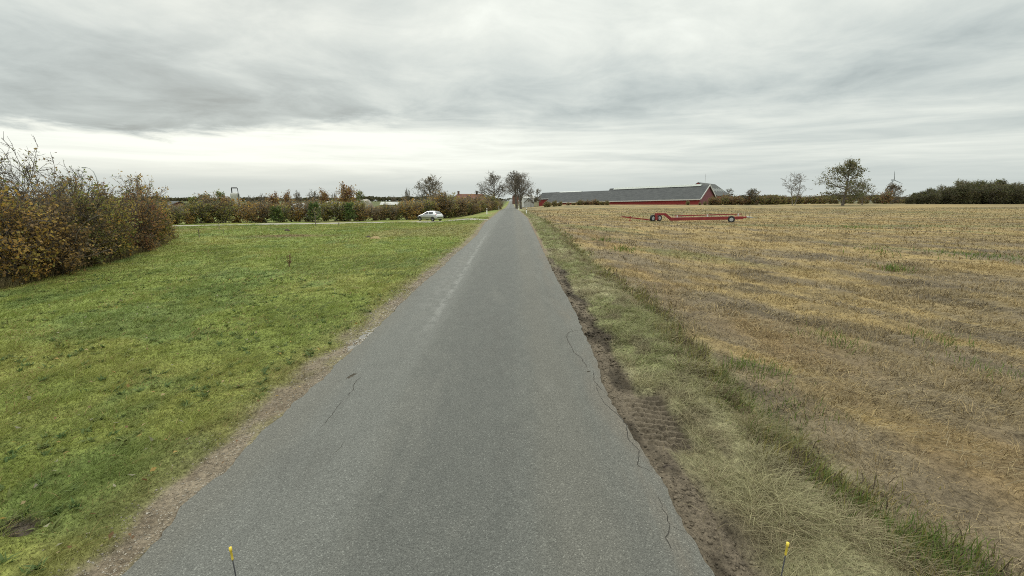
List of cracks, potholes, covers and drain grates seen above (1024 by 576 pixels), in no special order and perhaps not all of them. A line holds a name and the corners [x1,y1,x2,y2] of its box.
crack [658,497,687,548]
crack [566,329,650,471]
